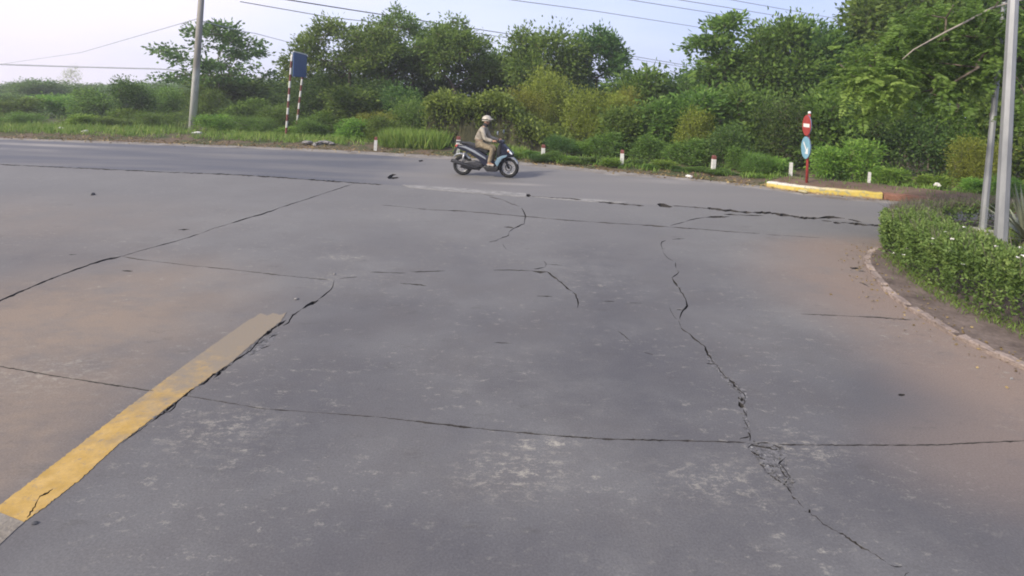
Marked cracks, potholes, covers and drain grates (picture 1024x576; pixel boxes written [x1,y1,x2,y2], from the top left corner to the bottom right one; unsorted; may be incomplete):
crack [27,489,53,517]
crack [661,206,909,575]
crack [534,264,579,308]
crack [124,282,334,442]
crack [485,194,644,246]
